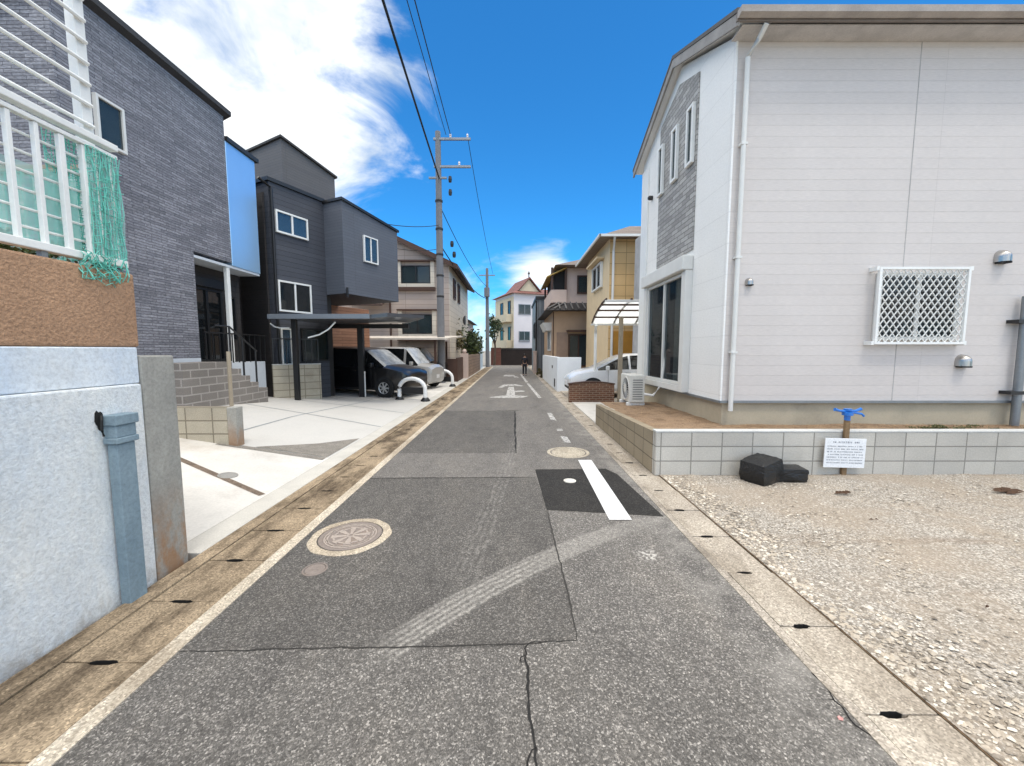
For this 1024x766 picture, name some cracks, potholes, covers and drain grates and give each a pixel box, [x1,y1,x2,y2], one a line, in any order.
manhole cover [547,447,590,458]
manhole cover [307,519,392,557]
utility cover [301,562,328,577]
crack [186,640,573,766]
